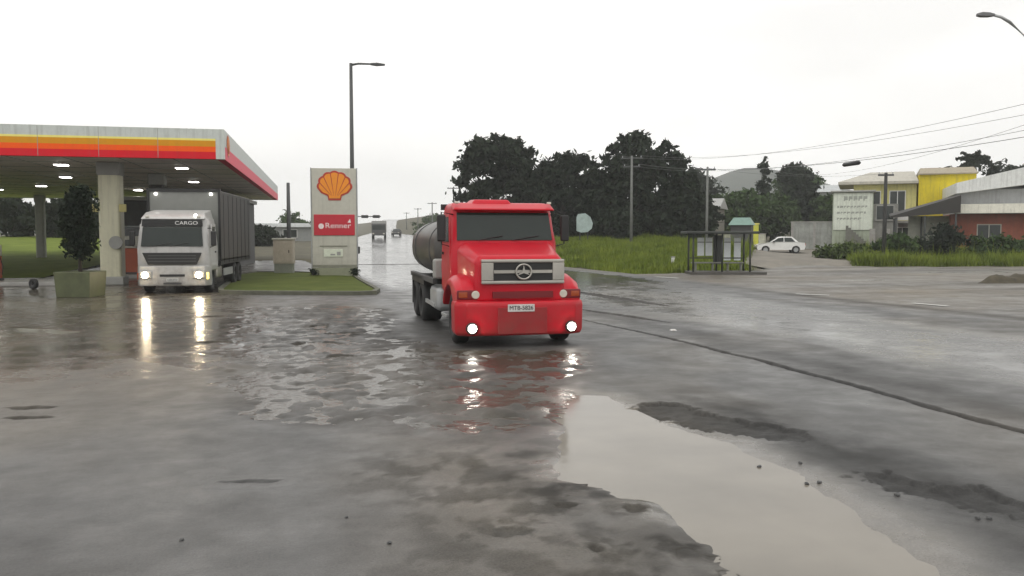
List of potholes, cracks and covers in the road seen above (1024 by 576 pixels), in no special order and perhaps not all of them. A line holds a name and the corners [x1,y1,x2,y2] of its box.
pothole [0,403,73,413]
pothole [198,474,302,490]
pothole [0,413,71,423]
